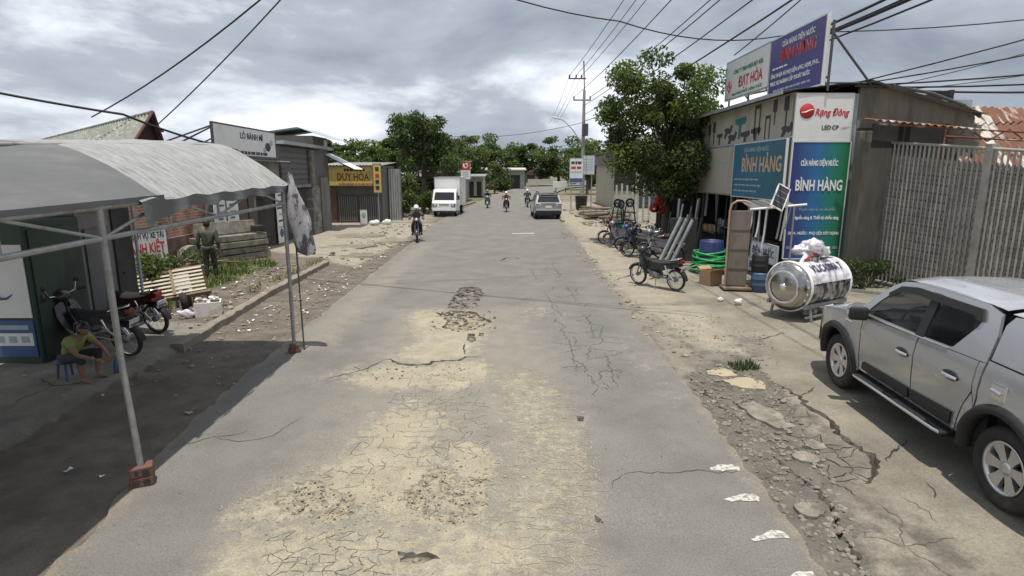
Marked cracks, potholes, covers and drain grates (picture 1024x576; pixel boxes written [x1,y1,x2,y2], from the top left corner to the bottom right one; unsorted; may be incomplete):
pothole [448,287,484,309]
crack [261,531,395,576]
crack [532,263,623,396]
pothole [435,311,492,331]
crack [324,344,489,488]
pothole [398,466,495,527]
crack [687,375,954,576]
pothole [397,551,440,564]
